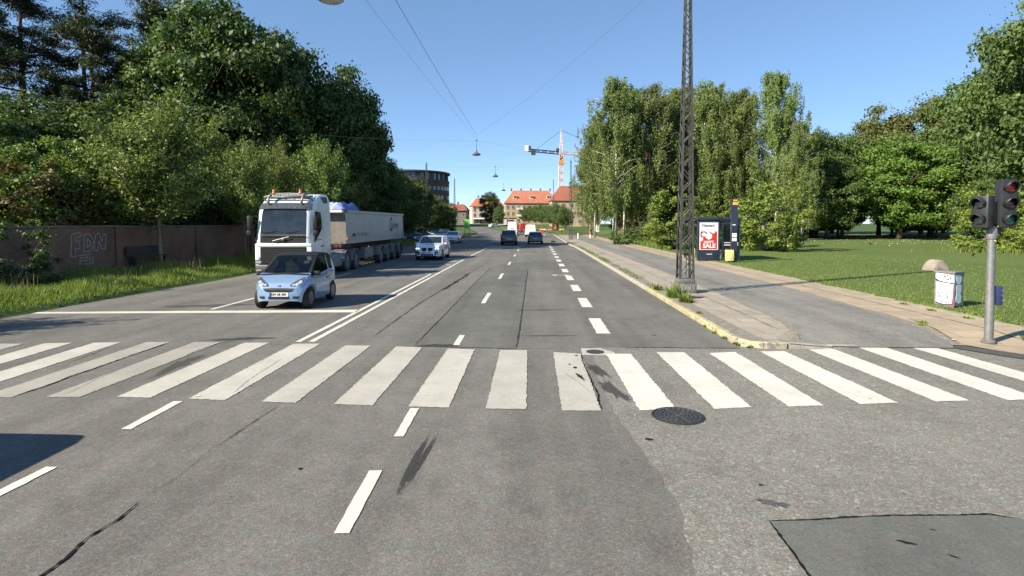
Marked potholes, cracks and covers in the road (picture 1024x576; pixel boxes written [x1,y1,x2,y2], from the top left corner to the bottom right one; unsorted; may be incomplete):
manhole cover [651,407,705,425]
crack [39,405,279,576]
